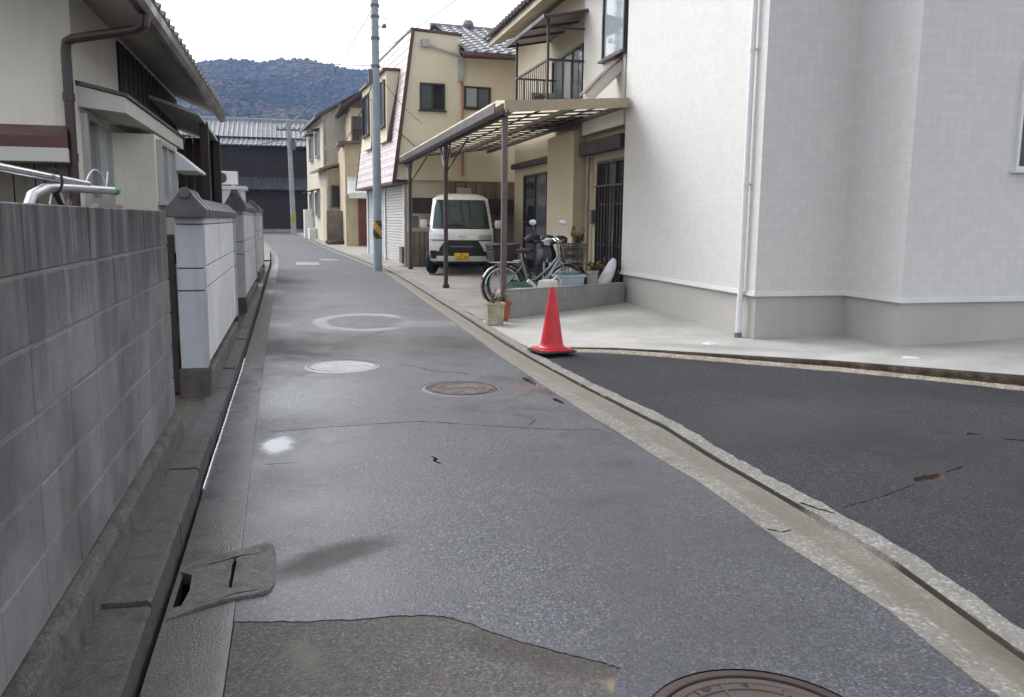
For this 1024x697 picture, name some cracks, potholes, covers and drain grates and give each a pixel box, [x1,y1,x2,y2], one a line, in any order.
manhole cover [422,381,502,397]
manhole cover [653,670,840,697]
drain grate [165,542,276,621]
manhole cover [304,360,380,373]
crack [800,484,915,514]
crack [264,420,564,433]
